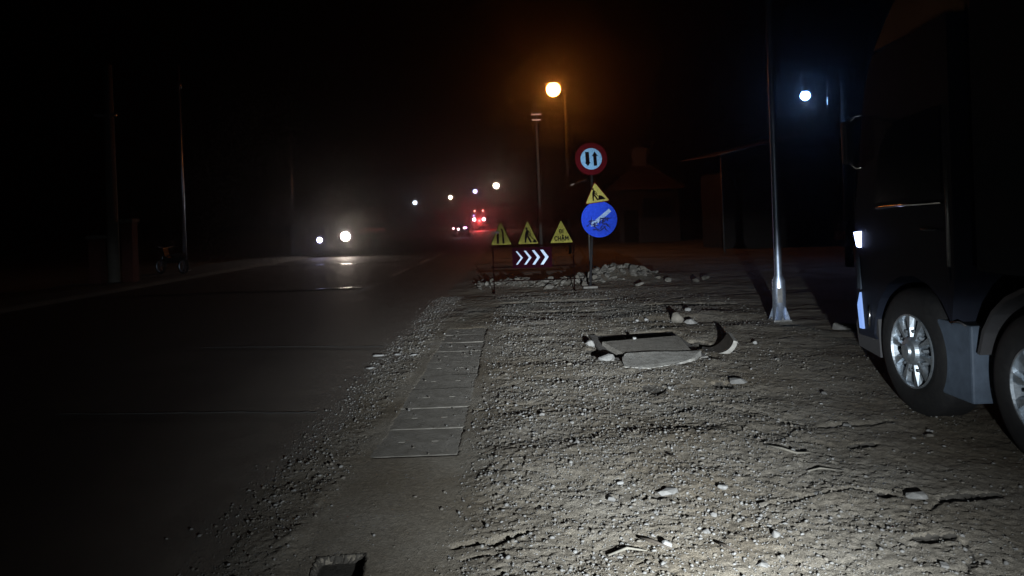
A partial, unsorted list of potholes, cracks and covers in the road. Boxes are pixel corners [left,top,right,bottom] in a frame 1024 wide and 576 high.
manhole cover [602,336,691,358]
